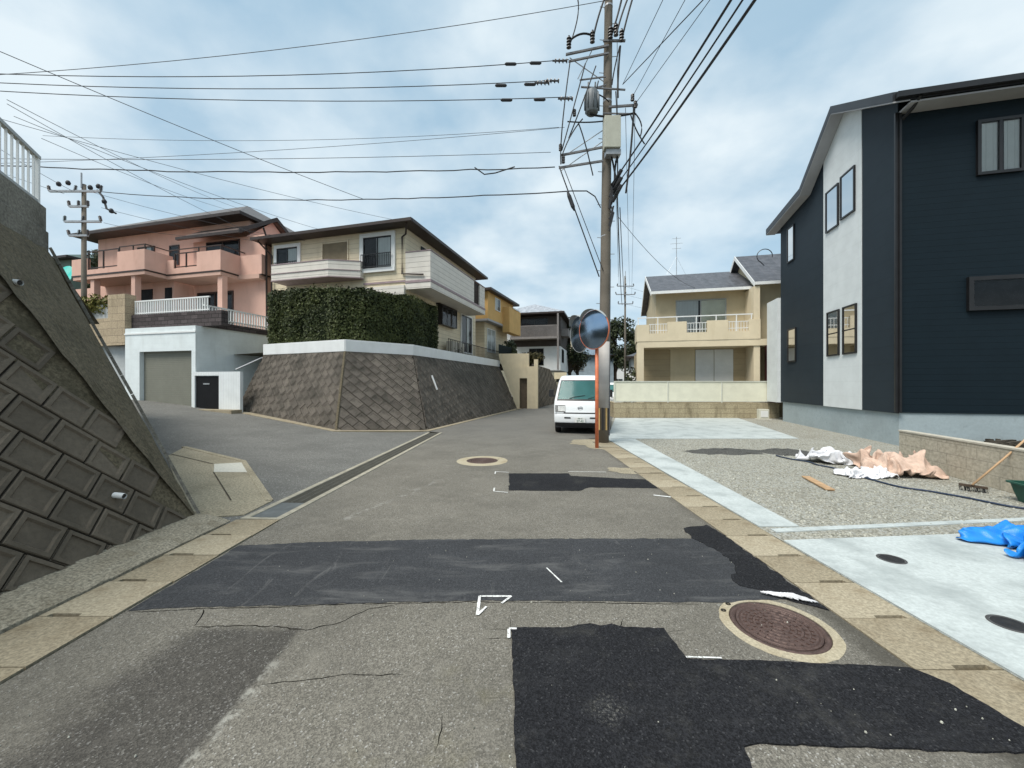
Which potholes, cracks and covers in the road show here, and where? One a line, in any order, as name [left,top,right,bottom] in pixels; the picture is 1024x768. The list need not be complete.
drain grate [365,456,394,464]
drain grate [283,486,334,503]
drain grate [318,474,359,487]
drain grate [343,464,379,474]
manhole cover [457,456,508,466]
manhole cover [719,600,846,663]
crack [261,674,393,685]
utility cover [985,614,1024,633]
utility cover [876,554,908,564]
crack [195,604,397,630]
